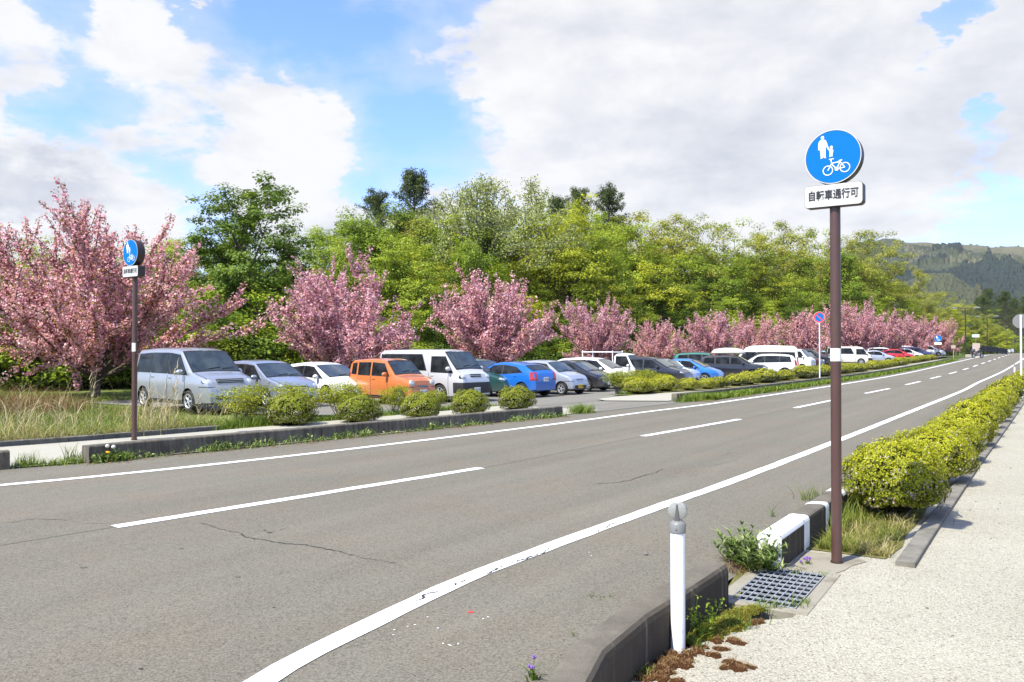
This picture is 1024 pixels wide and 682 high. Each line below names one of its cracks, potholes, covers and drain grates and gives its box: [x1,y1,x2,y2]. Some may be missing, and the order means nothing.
drain grate [728,566,841,622]
crack [202,523,402,566]
